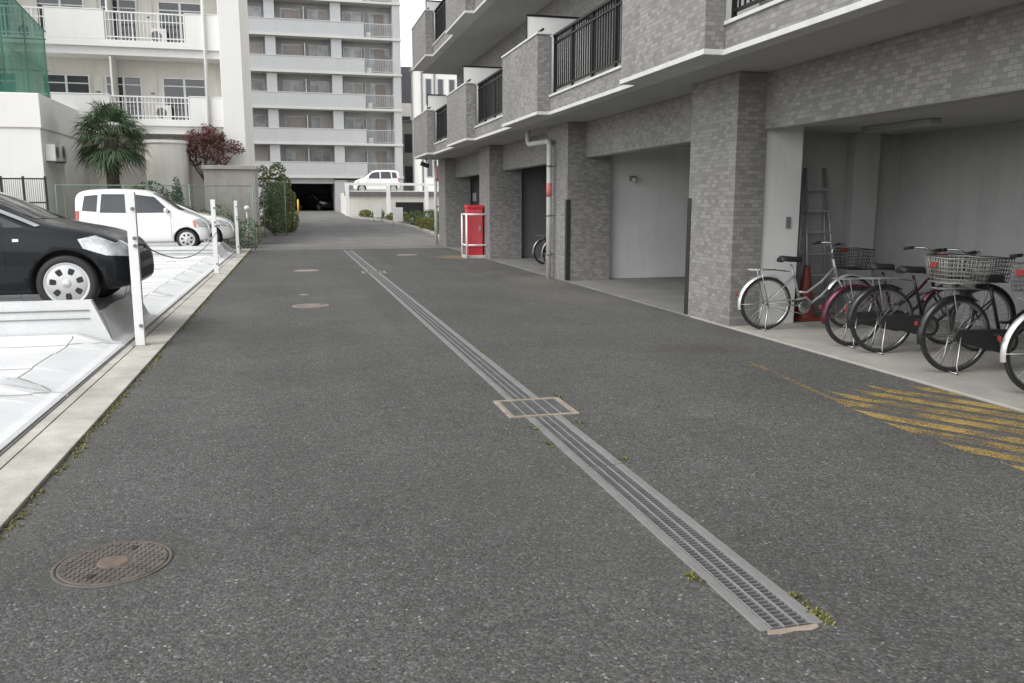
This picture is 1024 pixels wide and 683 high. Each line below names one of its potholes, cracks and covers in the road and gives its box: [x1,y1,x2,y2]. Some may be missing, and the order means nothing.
manhole cover [50,540,173,588]
drain grate [493,397,580,418]
